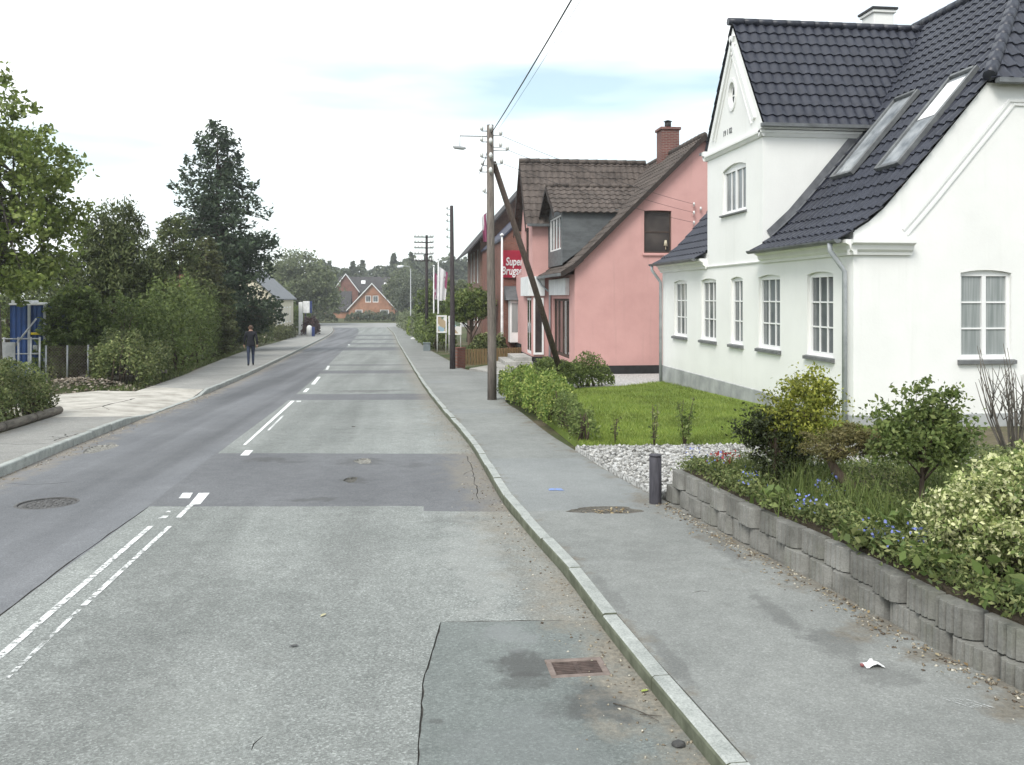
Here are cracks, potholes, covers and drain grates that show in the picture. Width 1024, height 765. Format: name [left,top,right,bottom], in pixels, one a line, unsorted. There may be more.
drain grate [544,657,610,678]
manhole cover [13,497,80,509]
crack [417,622,441,765]
